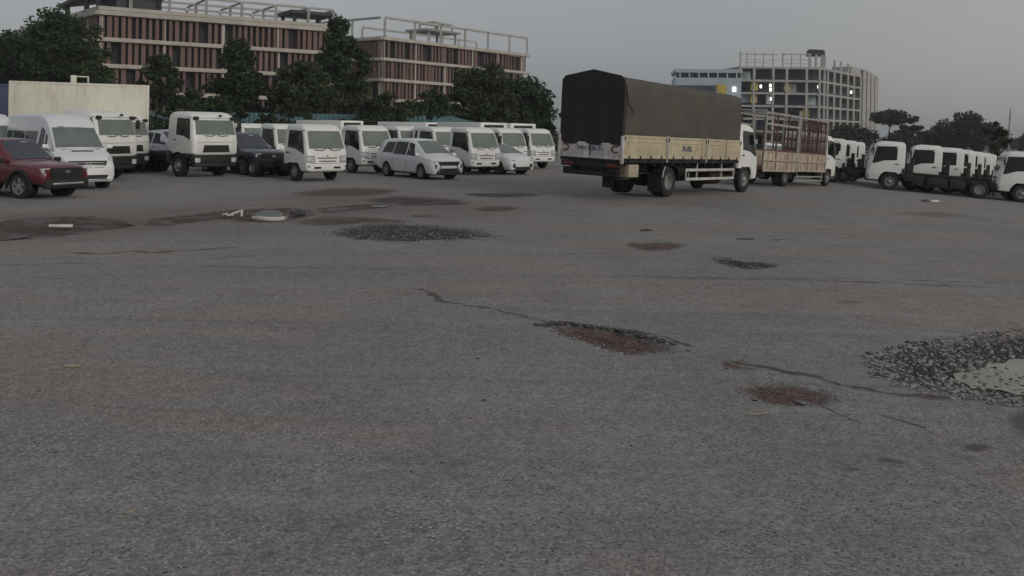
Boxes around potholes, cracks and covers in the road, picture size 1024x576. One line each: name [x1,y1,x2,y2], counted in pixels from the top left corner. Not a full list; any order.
crack [3,247,547,322]
pothole [533,320,679,356]
pothole [855,328,1024,407]
pothole [711,258,779,270]
pothole [315,221,507,243]
manhole cover [250,210,289,222]
crack [712,359,1021,429]
pothole [732,381,841,407]
